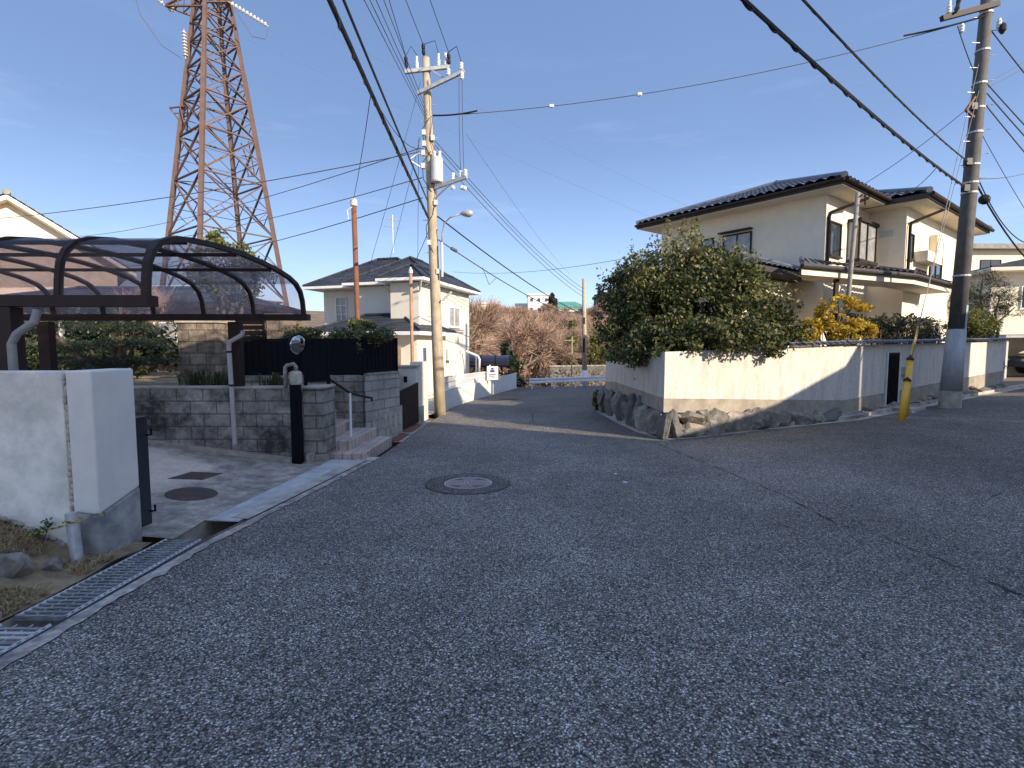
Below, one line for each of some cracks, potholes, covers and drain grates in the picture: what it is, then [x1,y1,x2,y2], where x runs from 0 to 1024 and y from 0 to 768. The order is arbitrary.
utility cover [168,472,223,480]
manhole cover [425,473,510,494]
utility cover [164,487,218,501]
drain grate [0,623,52,655]
drain grate [14,539,201,621]
